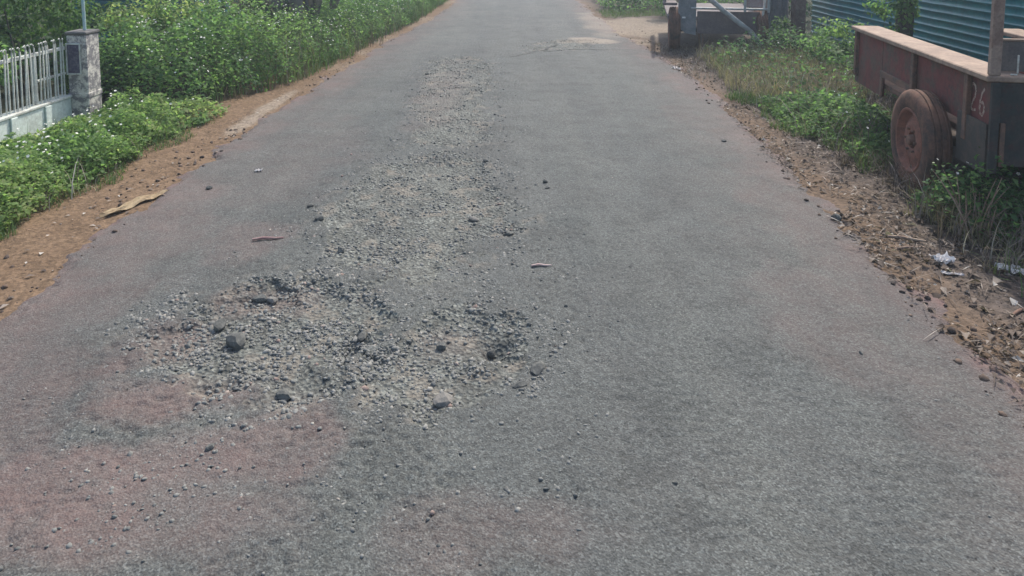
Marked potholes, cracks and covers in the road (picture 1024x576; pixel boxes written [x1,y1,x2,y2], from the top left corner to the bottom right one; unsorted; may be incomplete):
pothole [319,150,541,288]
pothole [405,56,500,148]
pothole [131,269,403,411]
pothole [355,303,543,431]
